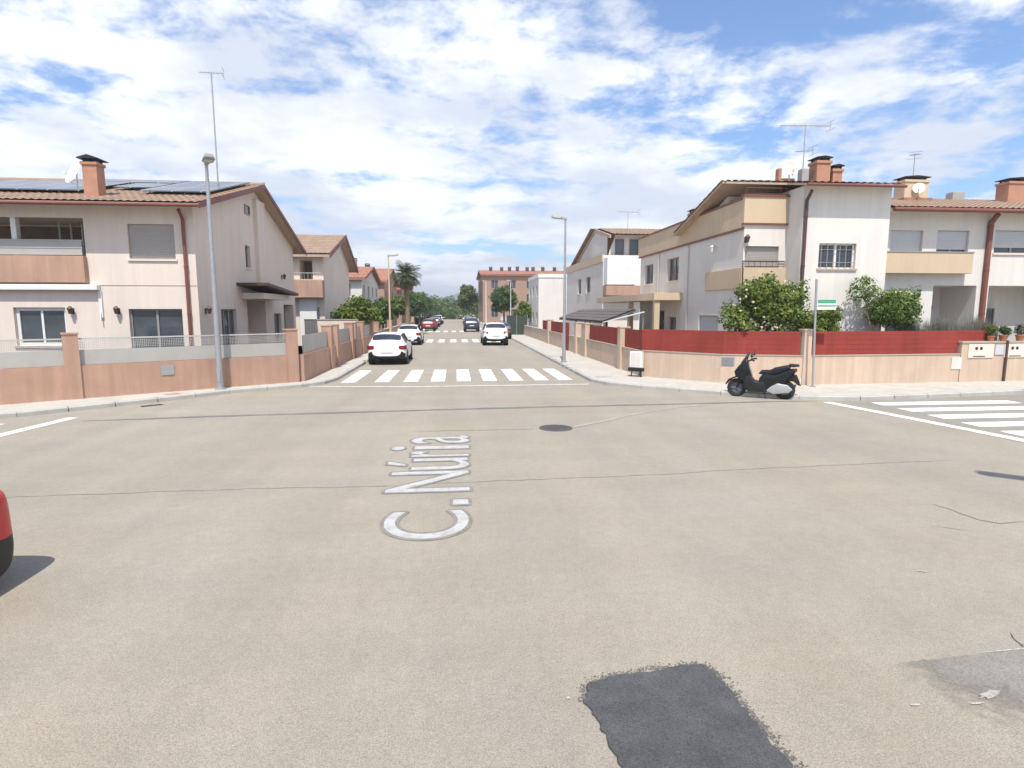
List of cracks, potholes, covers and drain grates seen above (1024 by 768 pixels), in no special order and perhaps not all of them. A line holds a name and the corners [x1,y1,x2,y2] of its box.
manhole cover [539,424,573,432]
crack [934,504,1024,530]
